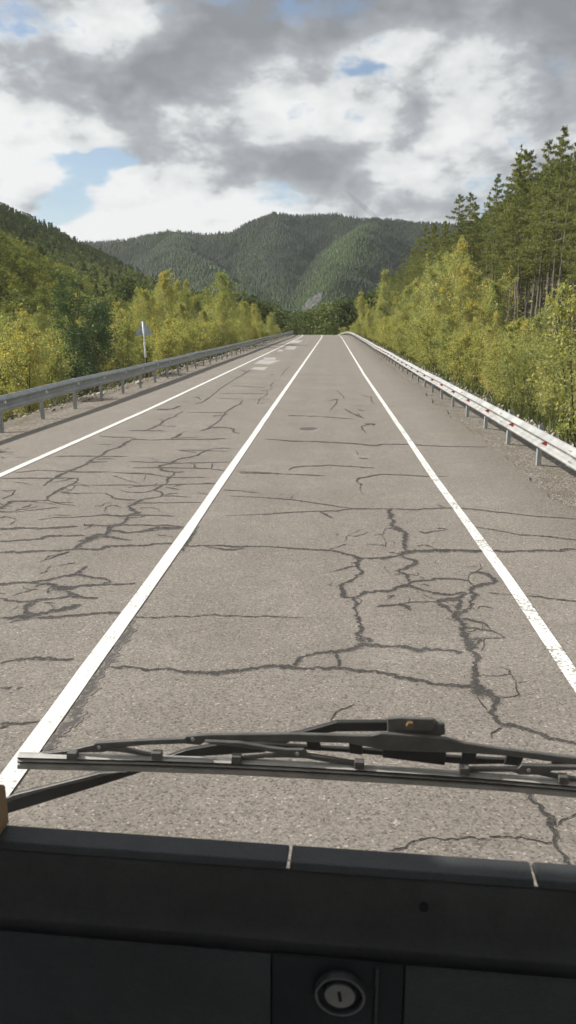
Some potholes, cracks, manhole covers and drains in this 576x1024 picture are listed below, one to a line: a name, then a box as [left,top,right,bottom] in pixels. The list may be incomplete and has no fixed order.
crack [489,592,575,601]
crack [392,793,576,865]
crack [0,366,290,524]
crack [479,527,576,540]
crack [240,390,470,495]
